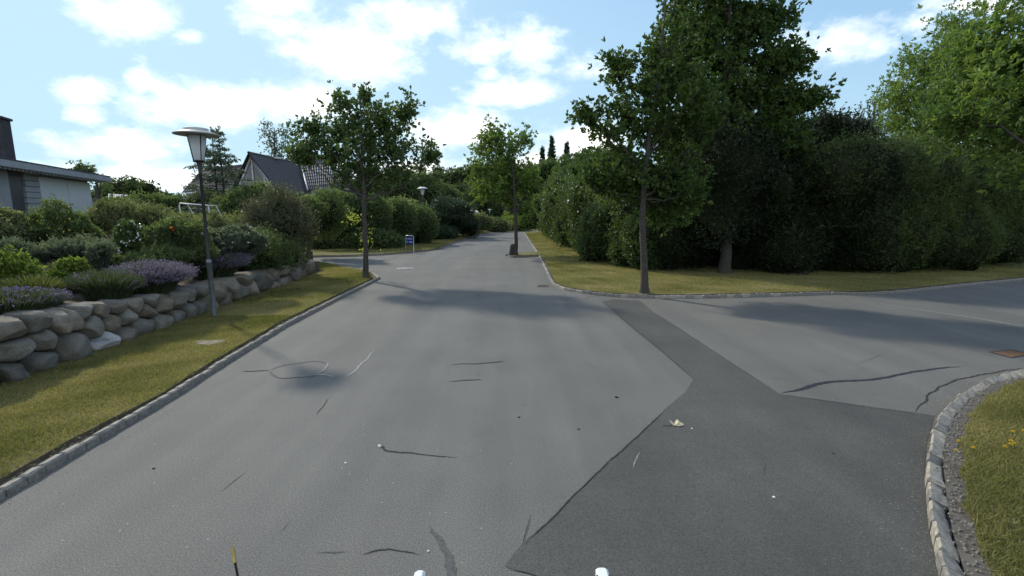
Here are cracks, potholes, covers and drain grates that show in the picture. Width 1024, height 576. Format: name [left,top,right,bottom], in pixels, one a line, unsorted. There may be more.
crack [915,368,1024,412]
crack [245,361,327,378]
crack [381,444,448,457]
